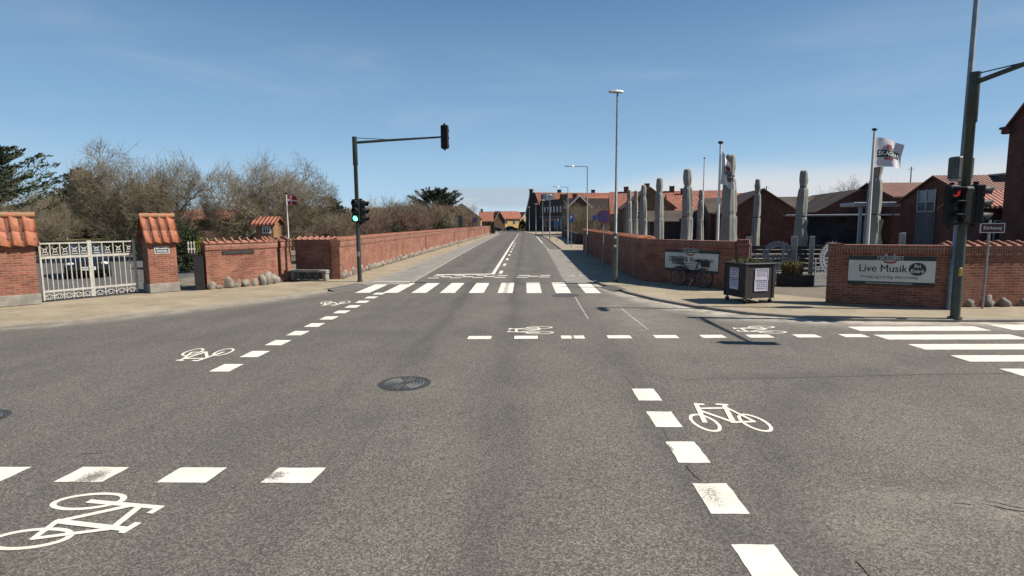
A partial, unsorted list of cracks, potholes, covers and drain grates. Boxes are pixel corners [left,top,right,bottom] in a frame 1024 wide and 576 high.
manhole cover [378,376,431,391]
